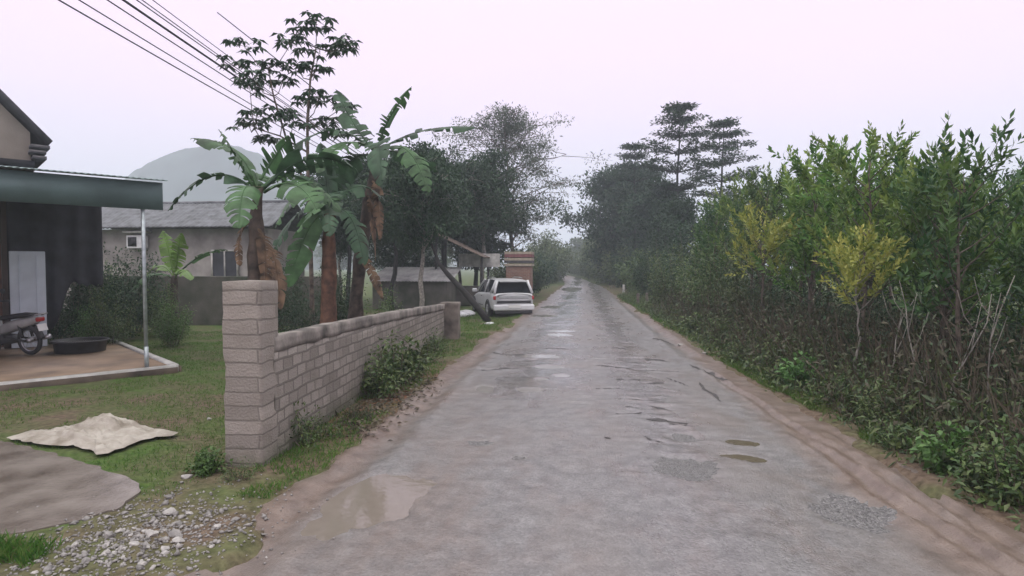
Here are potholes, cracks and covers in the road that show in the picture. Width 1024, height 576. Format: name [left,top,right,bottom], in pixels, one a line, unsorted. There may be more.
crack [596,338,728,442]
